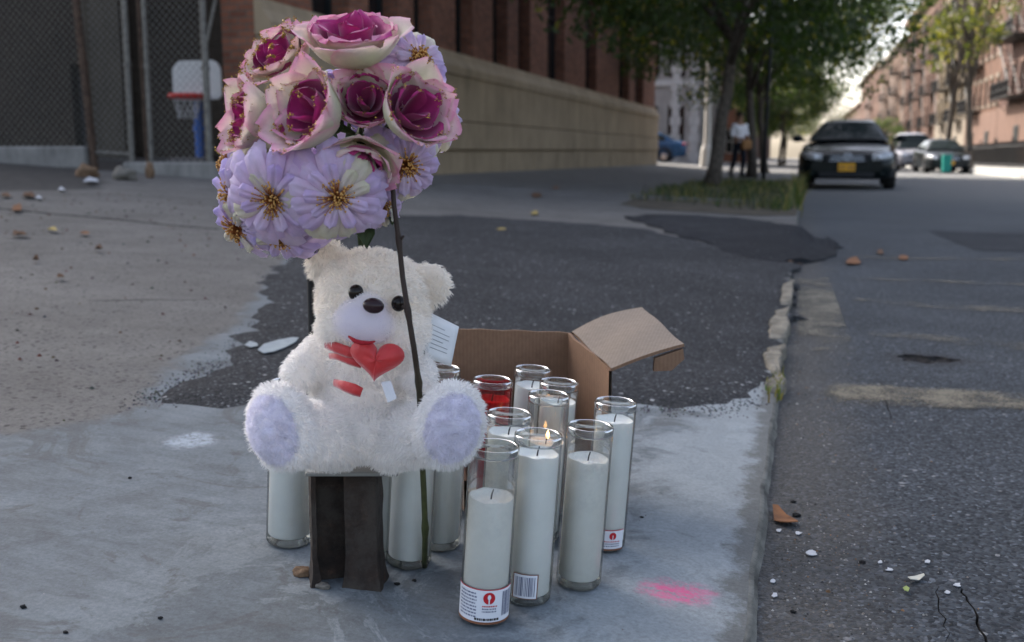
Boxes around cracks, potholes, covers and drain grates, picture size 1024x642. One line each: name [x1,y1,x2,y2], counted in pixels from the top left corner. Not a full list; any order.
pothole [897,354,961,364]
crack [935,583,988,642]
